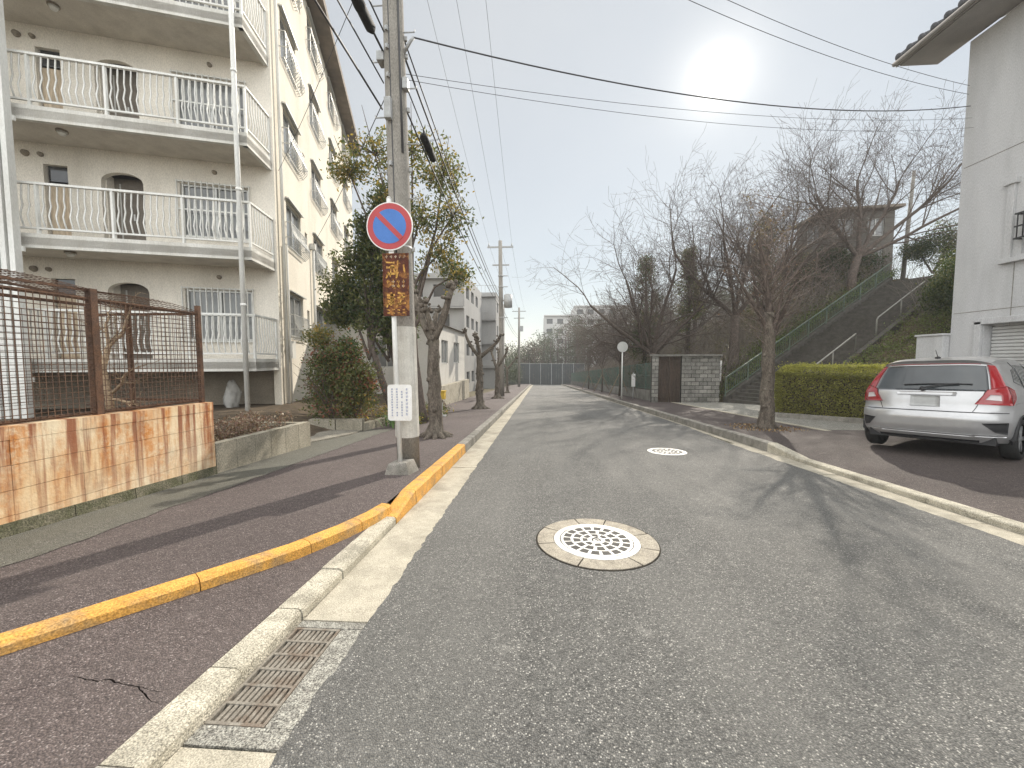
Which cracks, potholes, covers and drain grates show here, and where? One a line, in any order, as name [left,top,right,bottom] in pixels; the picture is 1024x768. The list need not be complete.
drain grate [204,627,341,728]
manhole cover [647,448,687,456]
crack [19,676,158,703]
manhole cover [536,519,661,571]
